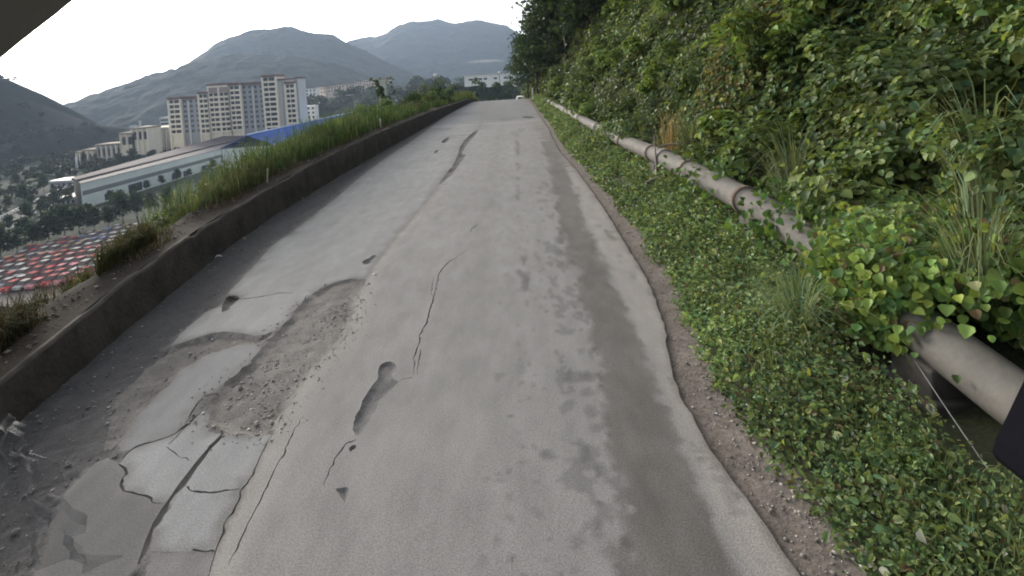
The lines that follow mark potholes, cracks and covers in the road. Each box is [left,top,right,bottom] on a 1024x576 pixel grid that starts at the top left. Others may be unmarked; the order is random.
crack [401,253,462,380]
crack [324,439,357,483]
pothole [353,361,399,436]
pothole [207,279,366,436]
crack [118,393,304,572]
